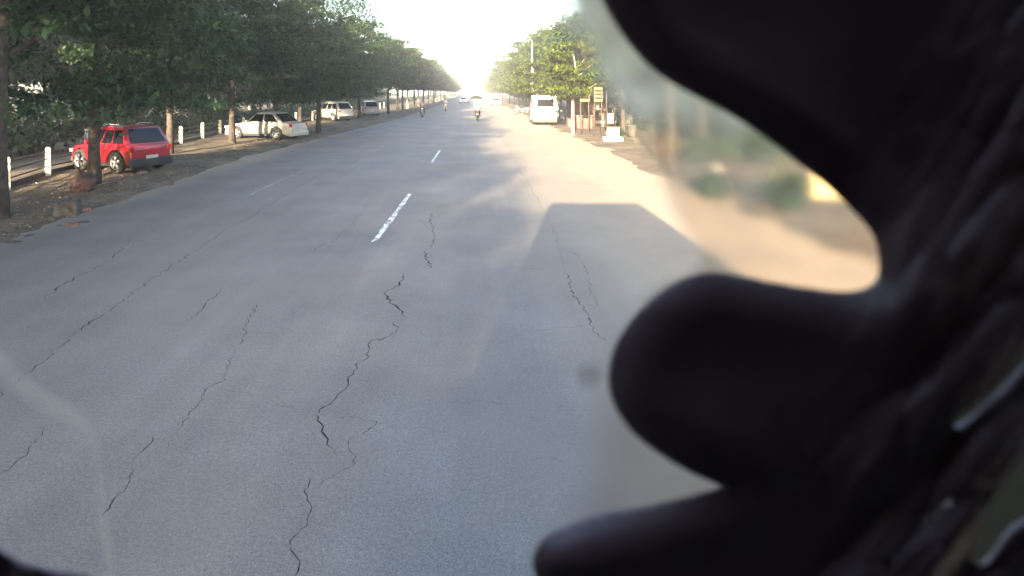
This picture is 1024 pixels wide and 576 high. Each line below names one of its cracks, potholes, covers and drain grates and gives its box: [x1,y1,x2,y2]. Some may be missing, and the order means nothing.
crack [102,306,257,515]
crack [277,276,432,576]
